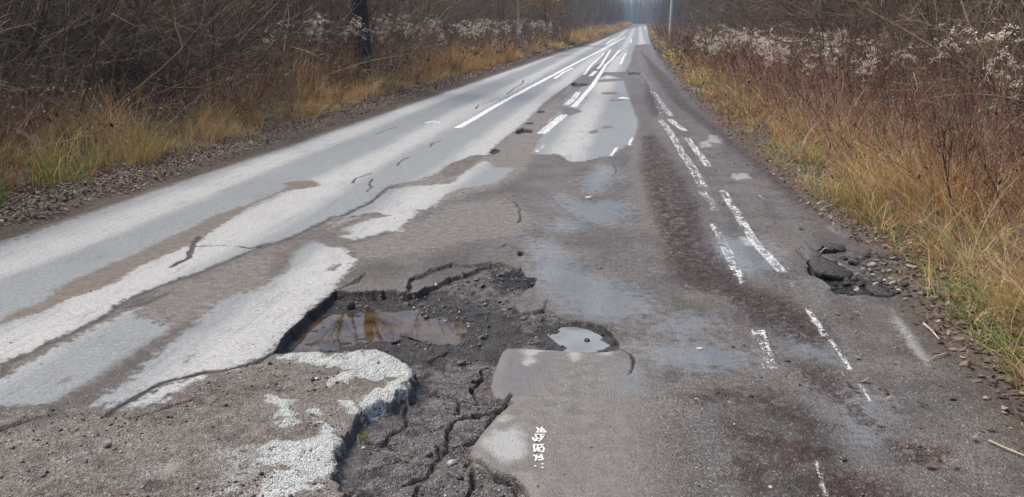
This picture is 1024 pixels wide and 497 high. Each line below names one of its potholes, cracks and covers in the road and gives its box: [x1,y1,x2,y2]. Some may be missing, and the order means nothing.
crack [363,24,653,497]
